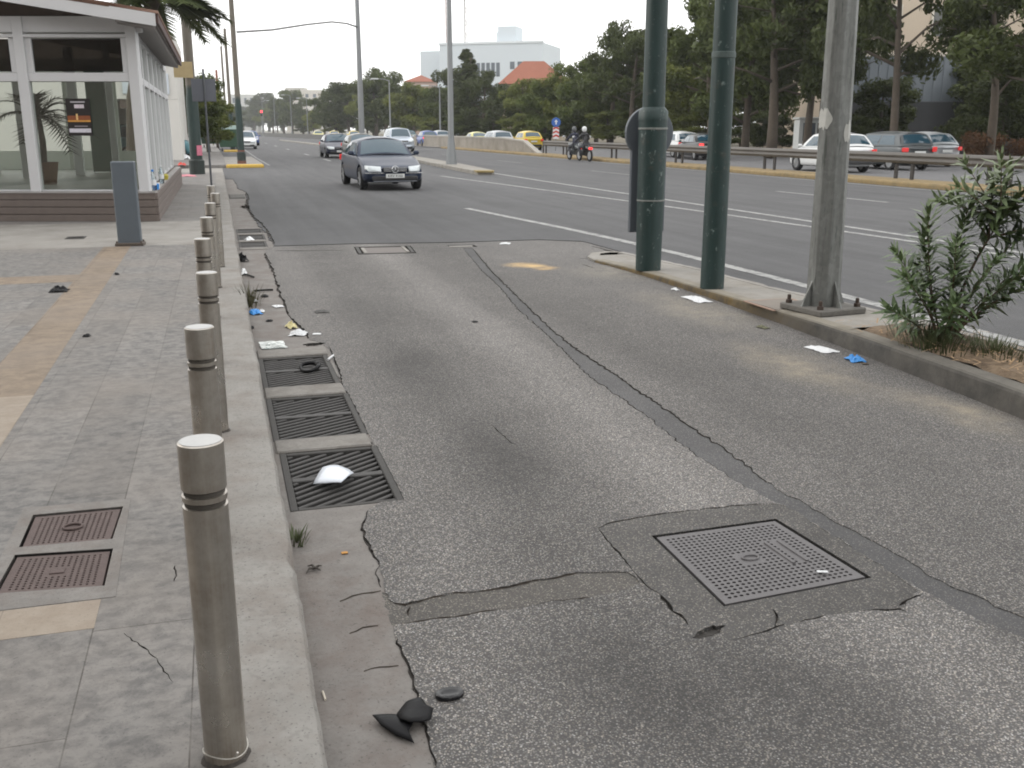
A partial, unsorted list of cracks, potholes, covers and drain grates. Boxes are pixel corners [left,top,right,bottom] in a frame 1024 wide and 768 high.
manhole cover [354,246,416,255]
utility cover [0,549,113,593]
drain grate [266,393,368,442]
pothole [693,625,725,639]
crack [124,633,170,679]
utility cover [19,508,121,547]
drain grate [279,446,404,512]
manhole cover [652,519,871,606]
crack [245,193,309,338]
drain grate [258,355,341,389]
